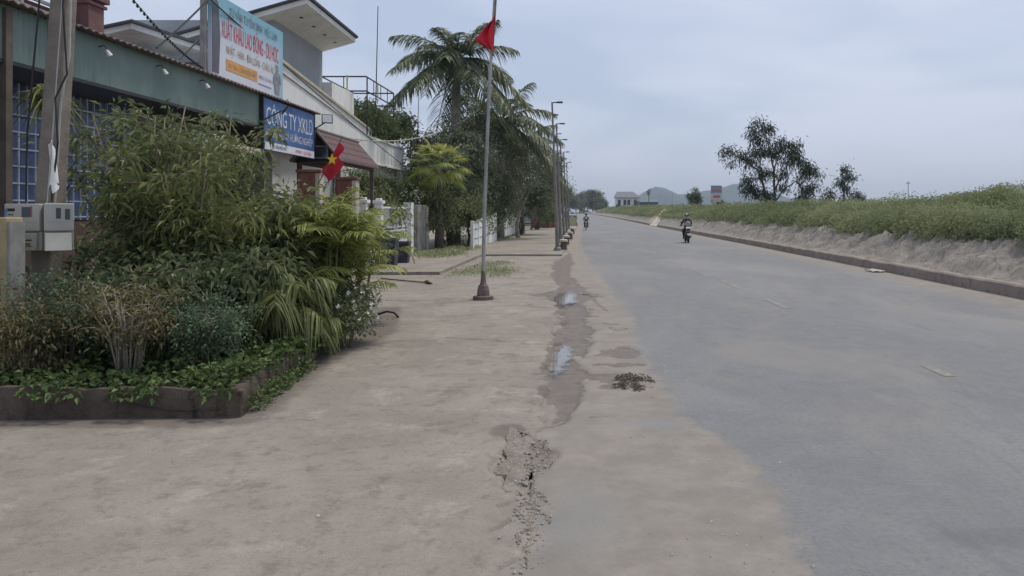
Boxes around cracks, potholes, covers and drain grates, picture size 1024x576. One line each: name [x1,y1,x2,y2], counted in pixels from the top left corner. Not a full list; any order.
crack [498,487,553,574]
